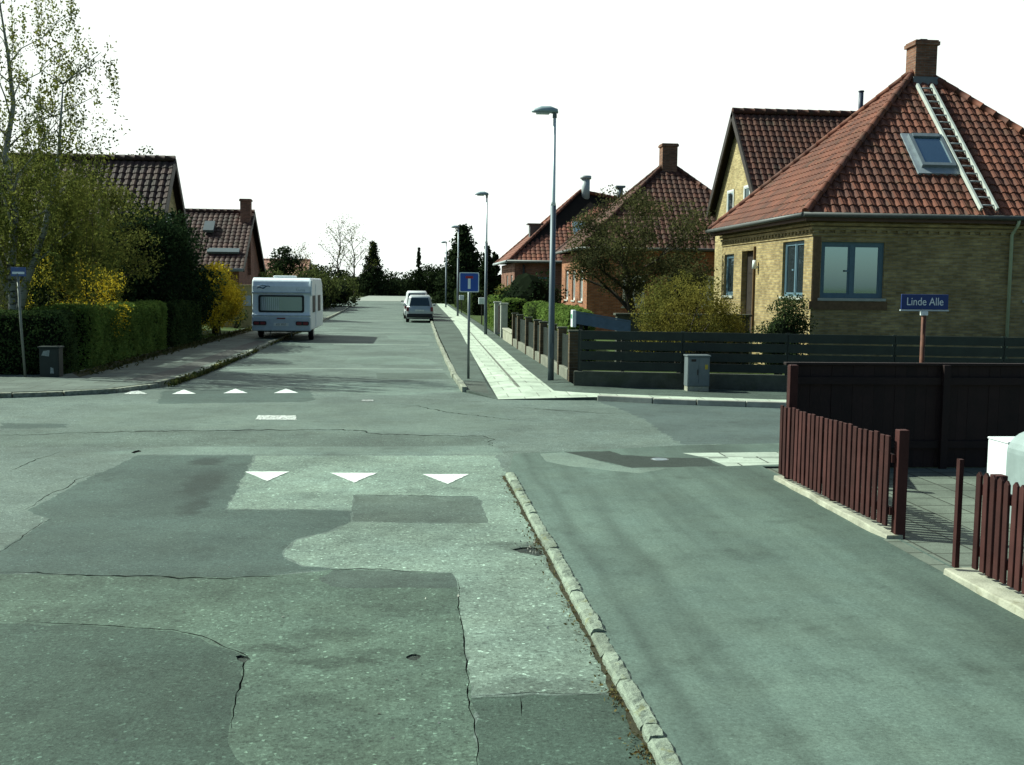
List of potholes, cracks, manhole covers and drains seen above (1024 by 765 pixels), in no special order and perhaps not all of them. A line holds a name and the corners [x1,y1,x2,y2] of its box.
crack [27,621,248,728]
crack [457,579,598,765]
crack [0,476,86,552]
